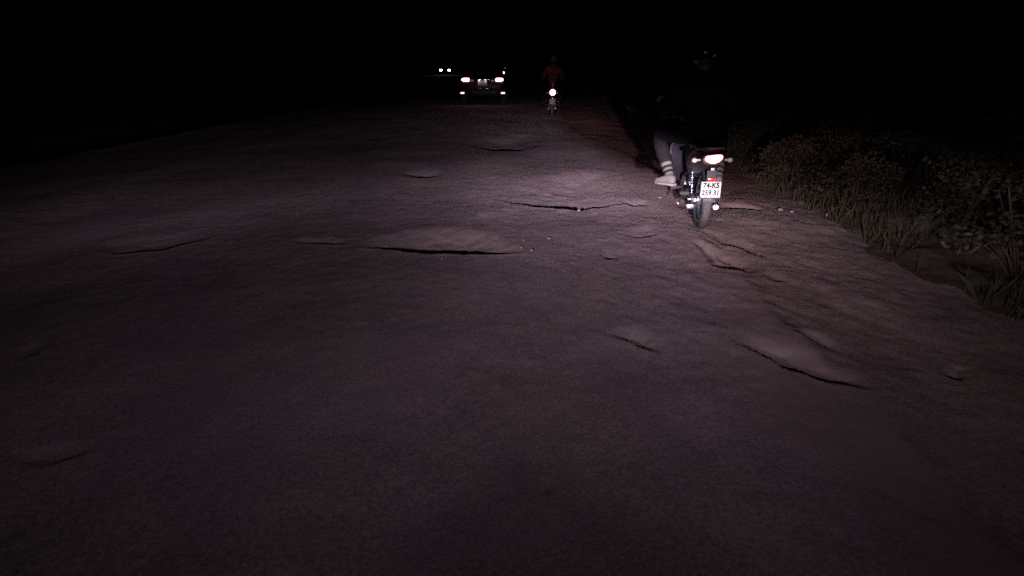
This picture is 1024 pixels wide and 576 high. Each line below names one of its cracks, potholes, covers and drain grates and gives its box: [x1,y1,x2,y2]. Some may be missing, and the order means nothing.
pothole [463,133,555,151]
pothole [393,168,452,178]
pothole [357,226,526,255]
pothole [940,363,972,380]
pothole [735,335,876,389]
pothole [289,236,355,245]
pothole [491,169,643,211]
pothole [692,239,761,273]
pothole [94,230,214,254]
pothole [604,322,674,355]
pothole [8,435,105,465]
